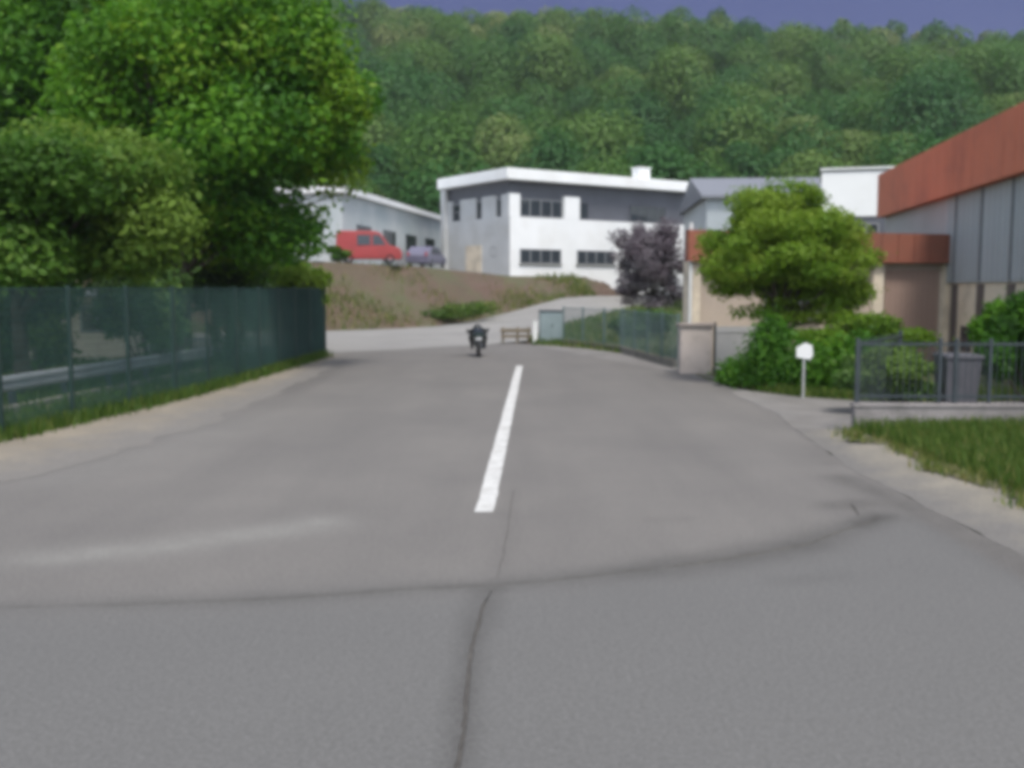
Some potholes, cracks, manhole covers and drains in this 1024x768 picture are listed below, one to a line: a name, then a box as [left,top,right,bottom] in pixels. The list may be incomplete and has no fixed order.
crack [20,490,880,768]
